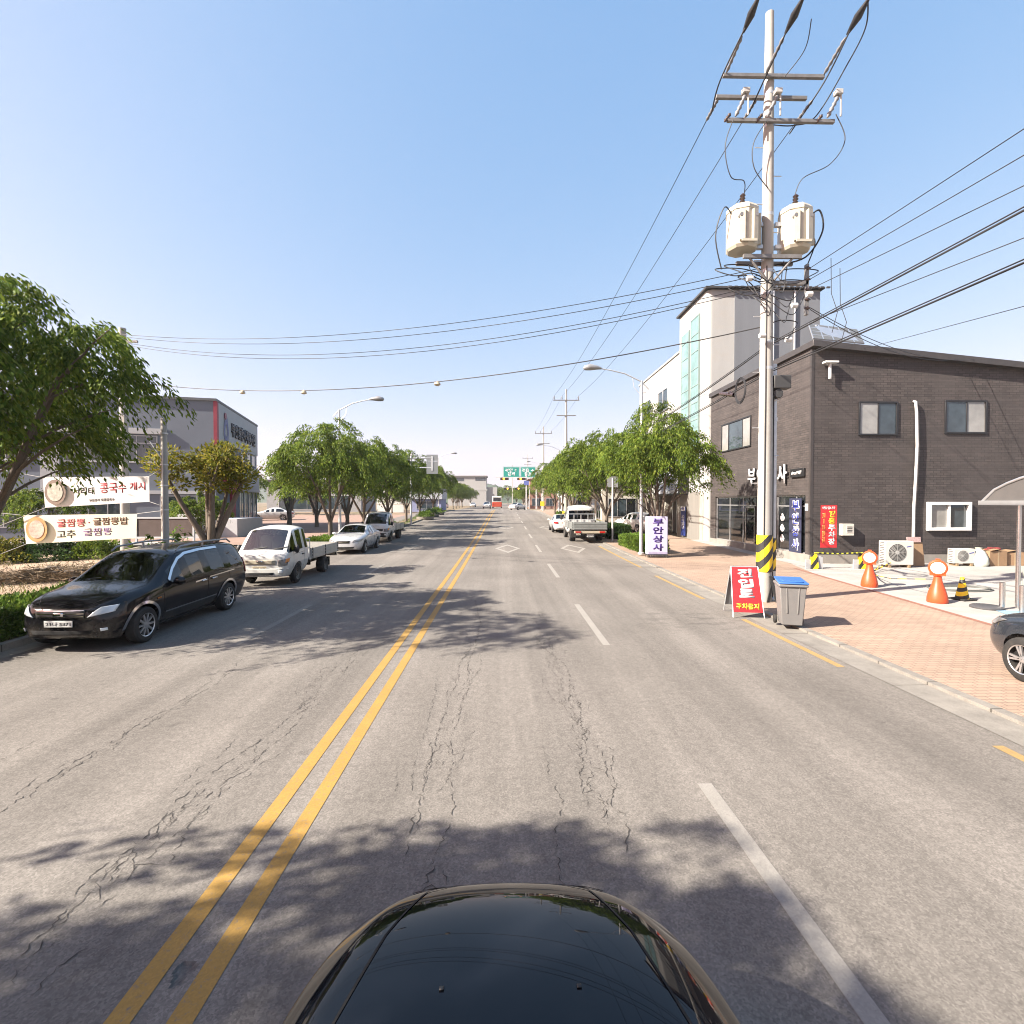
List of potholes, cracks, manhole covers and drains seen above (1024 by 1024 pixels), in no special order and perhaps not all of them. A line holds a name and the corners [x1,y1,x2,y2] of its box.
crack [11,645,365,998]
crack [395,604,488,866]
crack [532,609,630,883]
crack [423,865,447,890]
